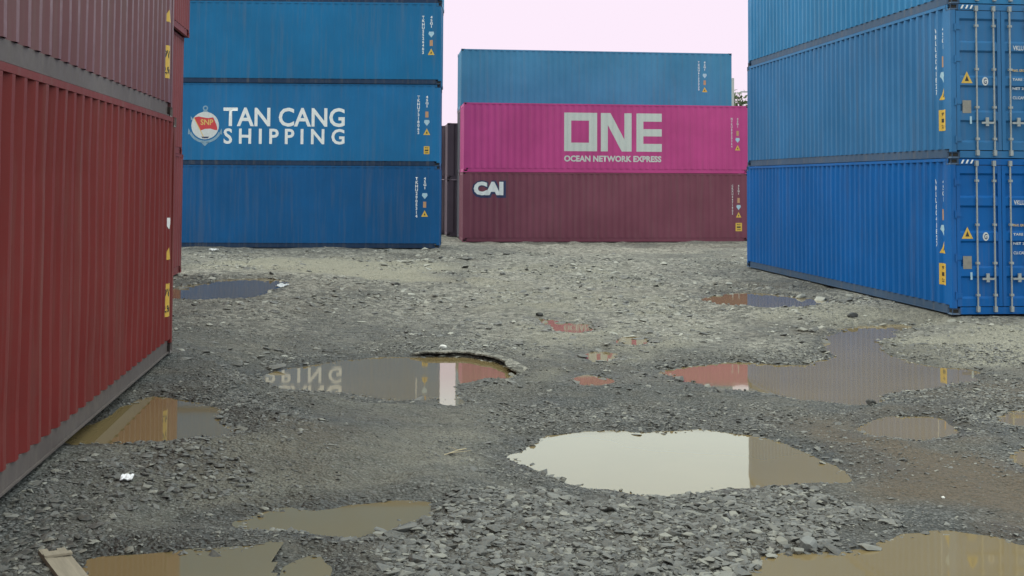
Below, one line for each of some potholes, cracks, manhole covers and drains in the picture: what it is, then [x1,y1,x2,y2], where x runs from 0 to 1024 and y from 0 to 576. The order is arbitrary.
pothole [653,320,985,406]
pothole [273,553,352,576]
pothole [847,409,989,442]
pothole [501,428,863,497]
pothole [559,369,625,386]
pothole [73,539,284,576]
pothole [573,348,625,362]
pothole [247,349,528,406]
pothole [526,316,603,333]
pothole [223,493,455,550]
pothole [711,524,1024,576]
pothole [693,291,836,308]
